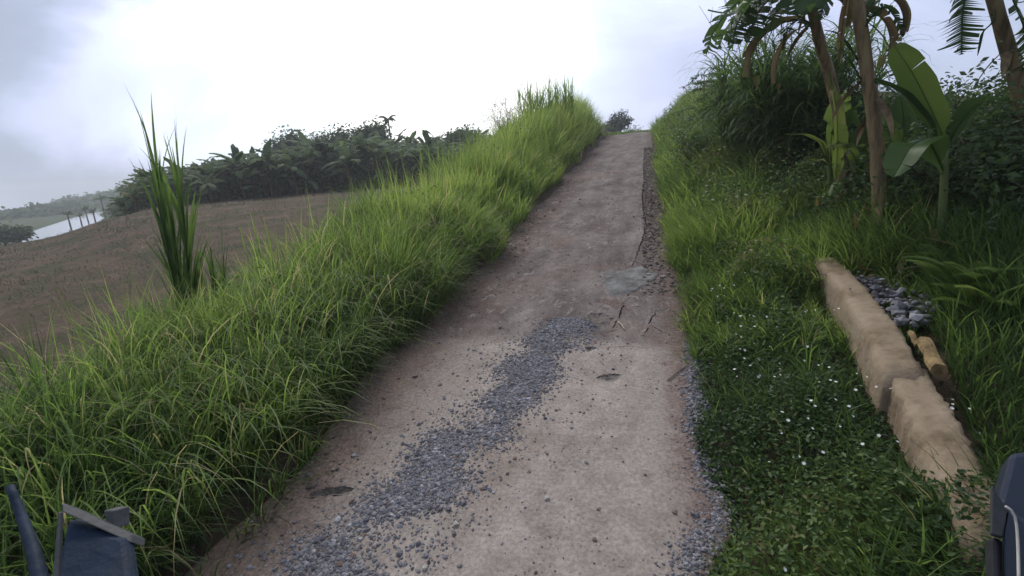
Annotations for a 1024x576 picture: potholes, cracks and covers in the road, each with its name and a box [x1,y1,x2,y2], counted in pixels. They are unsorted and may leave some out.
pothole [593,373,623,382]
crack [628,164,659,267]
crack [607,293,674,350]
